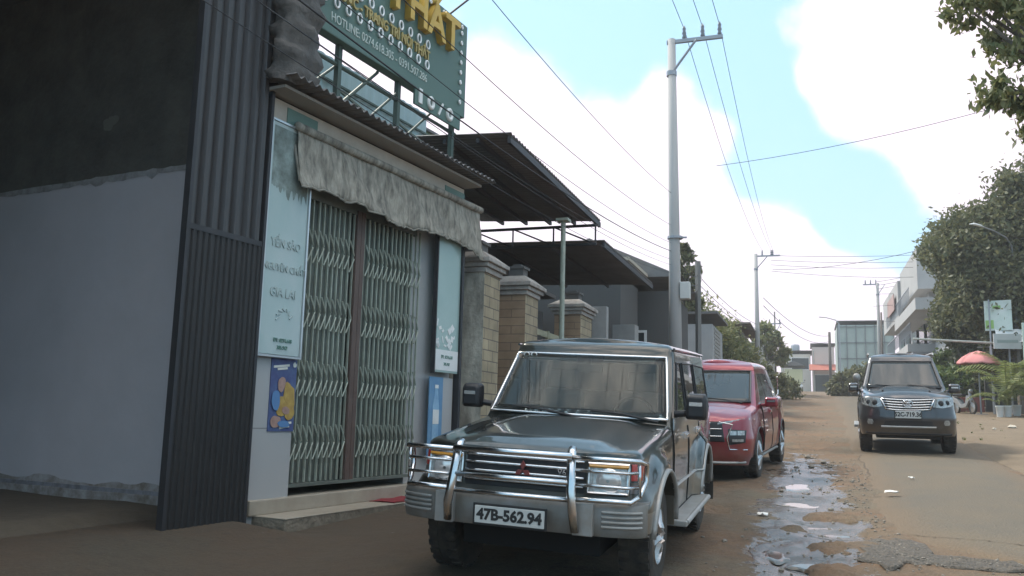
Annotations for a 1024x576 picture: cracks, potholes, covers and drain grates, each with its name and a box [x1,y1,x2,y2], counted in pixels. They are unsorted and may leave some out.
pothole [773,557,852,575]
pothole [776,457,831,469]
pothole [763,477,823,493]
pothole [748,541,811,571]
pothole [755,497,841,509]
pothole [804,531,868,541]
pothole [763,519,873,537]
